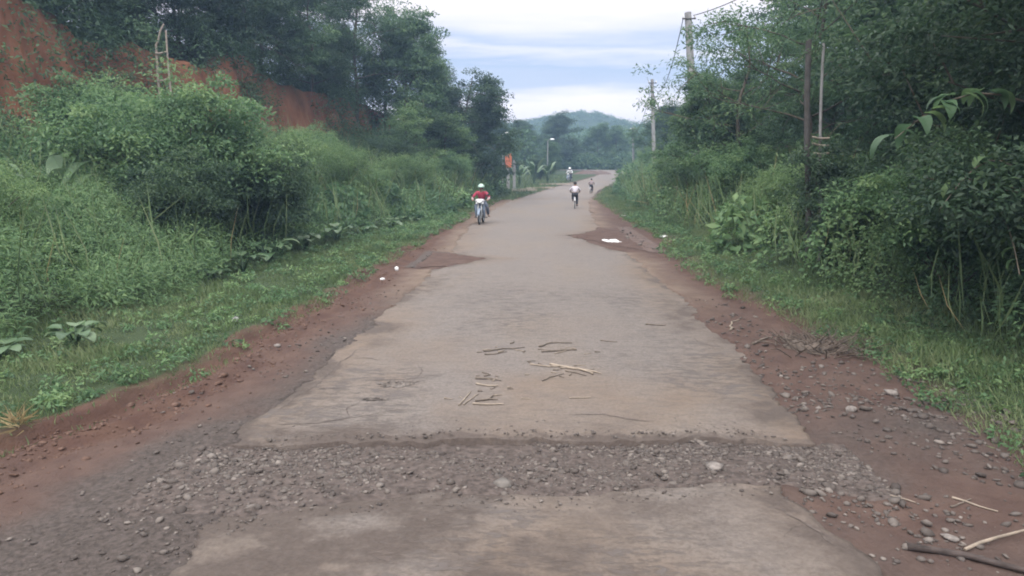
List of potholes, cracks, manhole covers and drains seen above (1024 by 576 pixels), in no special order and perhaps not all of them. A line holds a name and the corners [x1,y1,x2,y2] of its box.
pothole [582,227,666,253]
pothole [406,251,450,268]
crack [278,350,415,424]
pothole [115,438,904,517]
